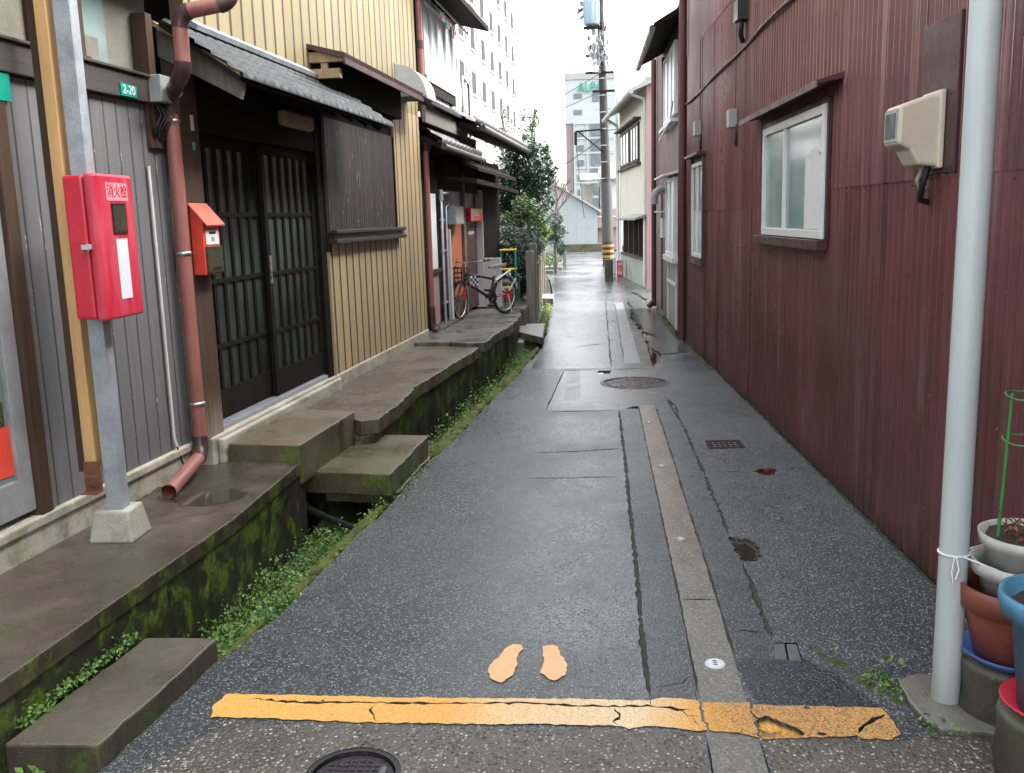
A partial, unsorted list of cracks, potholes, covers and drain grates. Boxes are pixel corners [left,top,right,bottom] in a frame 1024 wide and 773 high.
crack [858,716,884,733]
crack [269,370,773,723]
manhole cover [600,376,670,389]
pothole [754,468,777,476]
utility cover [774,644,802,661]
pothole [647,347,662,366]
pothole [729,536,762,564]
manhole cover [306,748,401,773]
